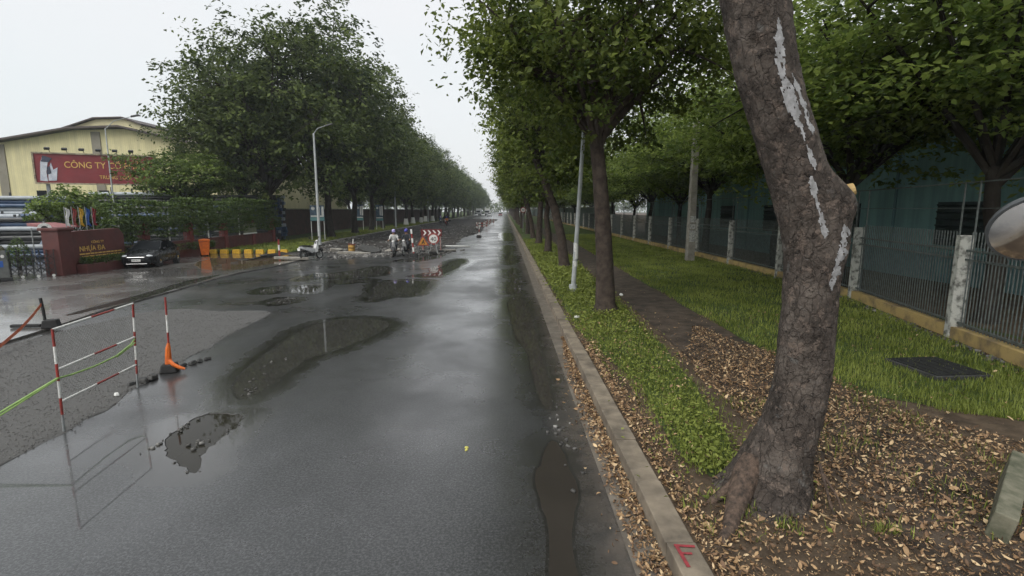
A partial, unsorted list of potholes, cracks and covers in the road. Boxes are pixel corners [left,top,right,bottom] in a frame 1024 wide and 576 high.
pothole [415,259,469,277]
pothole [368,280,430,301]
pothole [164,413,244,473]
